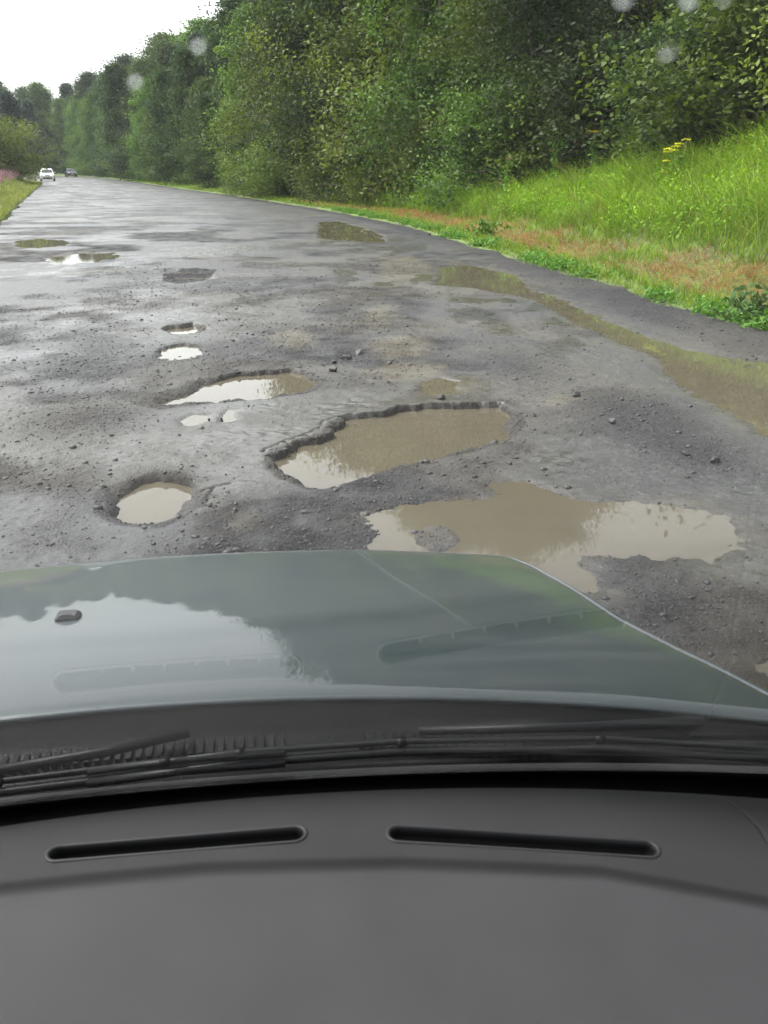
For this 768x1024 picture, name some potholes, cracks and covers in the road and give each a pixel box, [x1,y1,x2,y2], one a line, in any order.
pothole [250,400,537,493]
pothole [122,366,333,412]
pothole [77,468,220,533]
pothole [158,268,220,284]
pothole [156,322,213,335]
pothole [146,341,216,364]
pothole [345,475,760,600]
